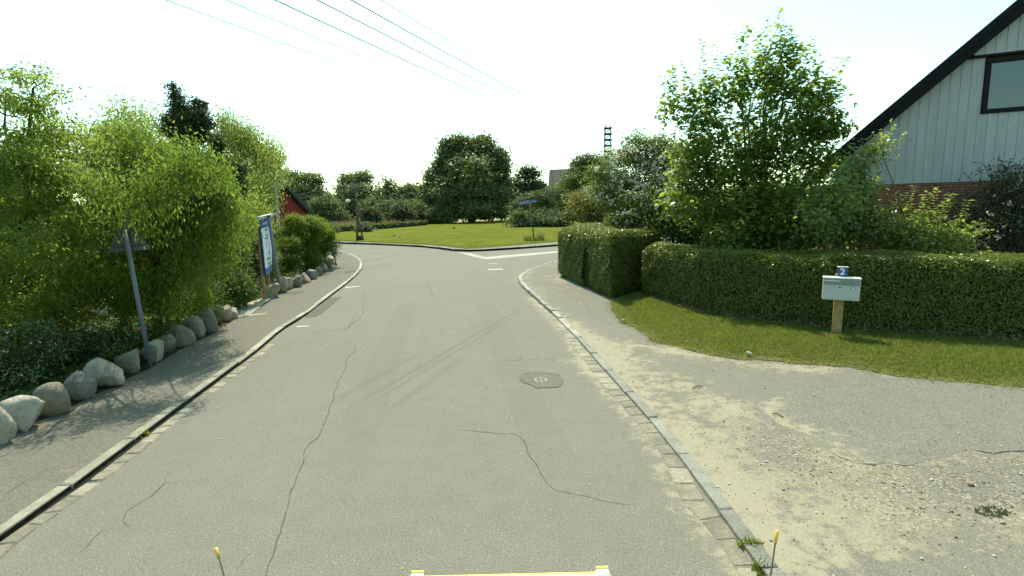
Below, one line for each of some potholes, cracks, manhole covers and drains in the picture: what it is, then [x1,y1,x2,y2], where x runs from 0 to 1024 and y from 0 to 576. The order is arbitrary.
manhole cover [519,372,563,388]
crack [241,349,355,575]
crack [454,429,629,505]
